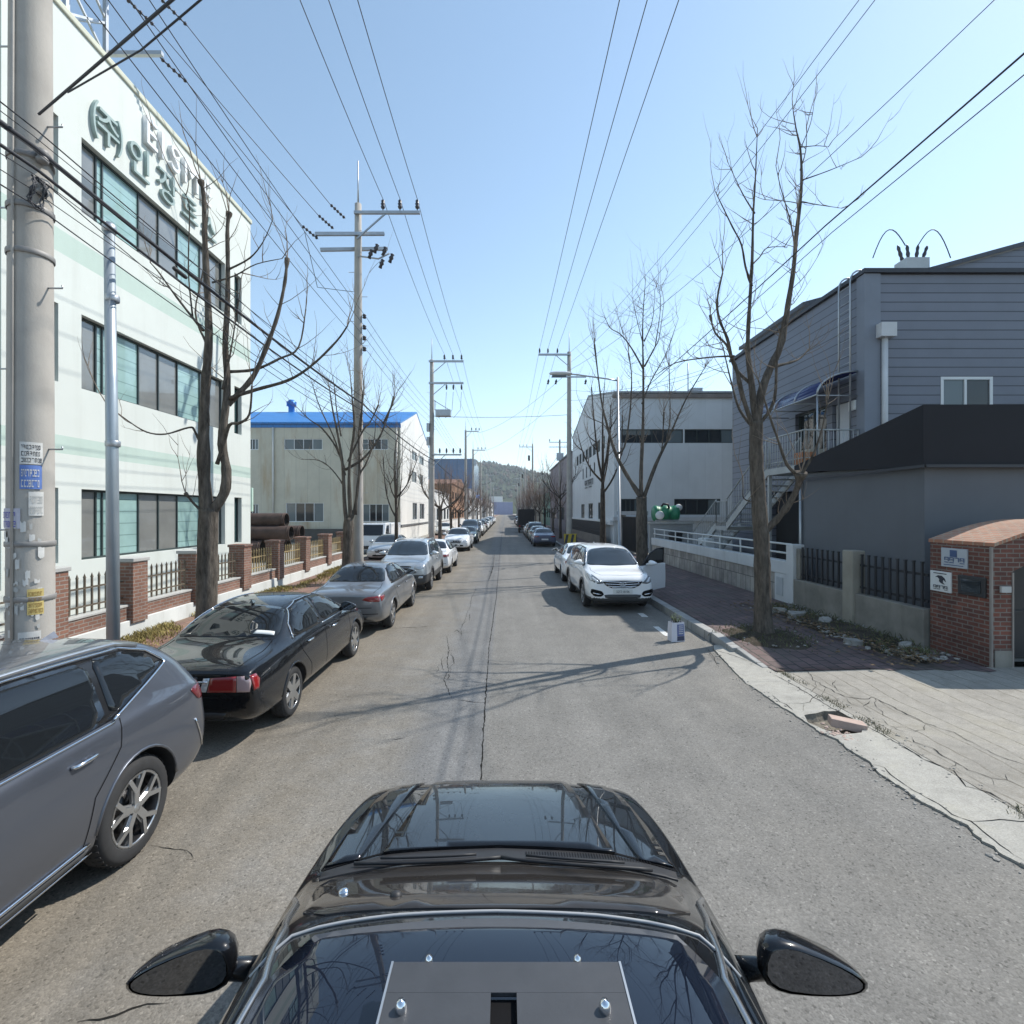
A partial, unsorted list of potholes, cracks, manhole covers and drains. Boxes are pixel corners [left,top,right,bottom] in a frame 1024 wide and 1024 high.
crack [776,672,1019,785]
pothole [804,711,858,734]
crack [375,555,495,703]
crack [77,1003,162,1022]
crack [872,764,1023,855]
